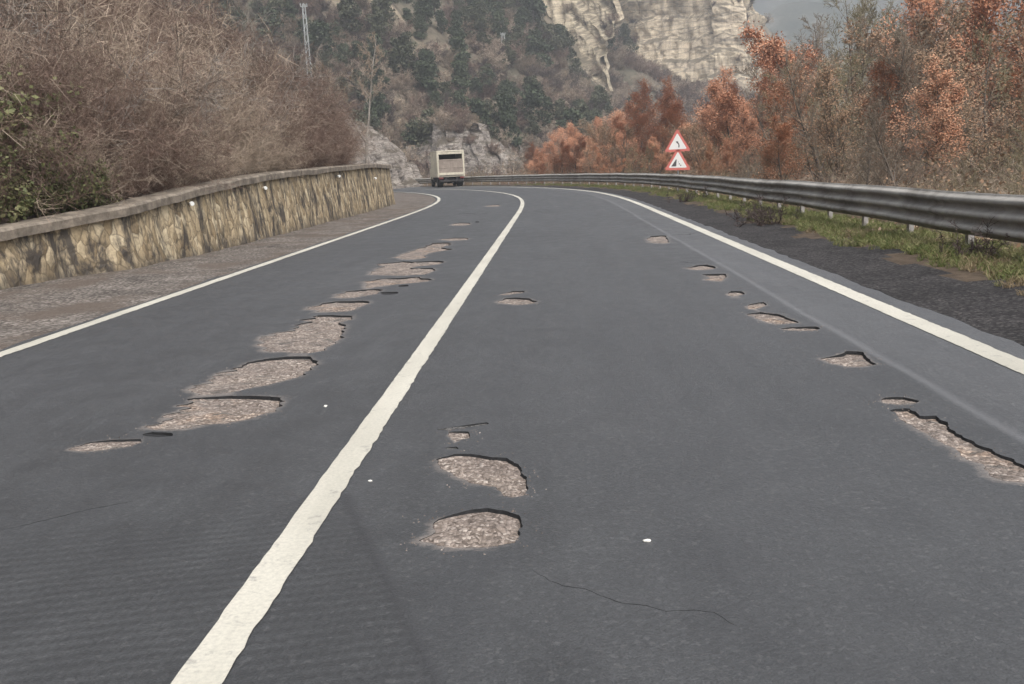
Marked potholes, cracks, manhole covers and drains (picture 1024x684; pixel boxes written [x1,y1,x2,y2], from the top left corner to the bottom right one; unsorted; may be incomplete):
crack [534,571,736,626]
pothole [369,261,444,276]
pothole [180,355,320,398]
pothole [356,276,432,288]
pothole [497,296,538,306]
pothole [869,392,926,411]
pothole [135,388,290,432]
pothole [444,428,481,444]
pothole [257,314,356,355]
pothole [400,504,543,557]
pothole [425,450,547,503]
pothole [882,406,1024,486]
